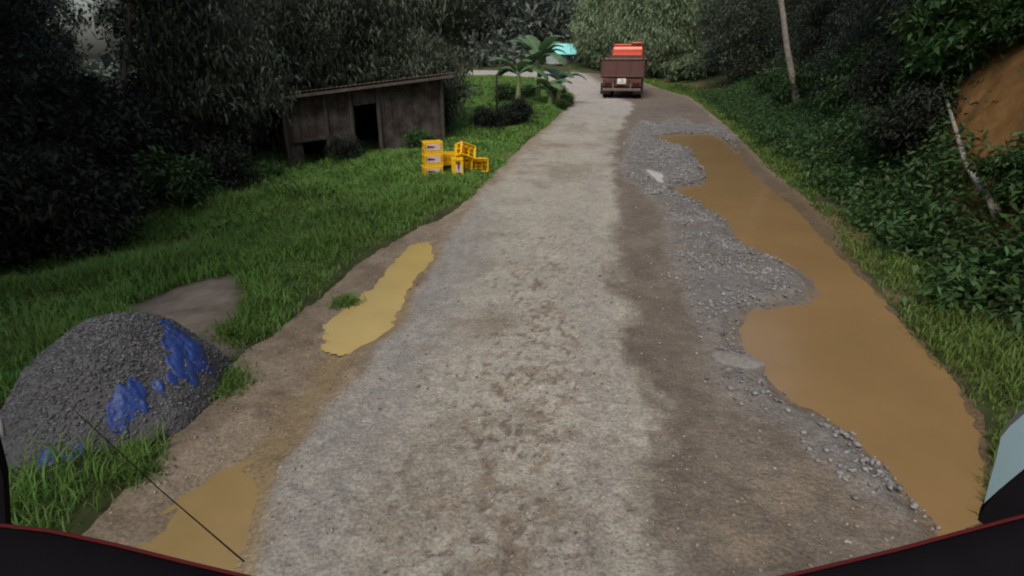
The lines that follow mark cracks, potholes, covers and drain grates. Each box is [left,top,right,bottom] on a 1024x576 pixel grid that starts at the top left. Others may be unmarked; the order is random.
pothole [648,130,991,542]
pothole [316,240,450,361]
pothole [124,453,296,576]
